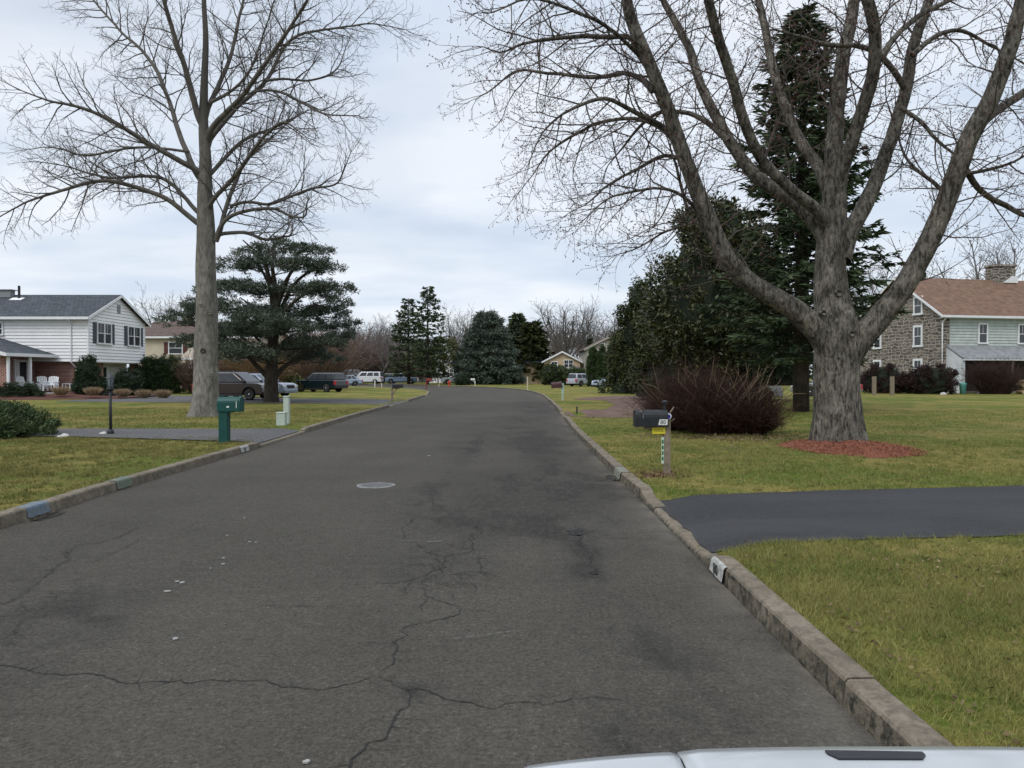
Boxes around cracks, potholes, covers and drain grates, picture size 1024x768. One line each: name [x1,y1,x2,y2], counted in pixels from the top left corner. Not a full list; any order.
crack [328,499,653,768]
crack [1,526,162,652]
crack [5,659,367,693]
